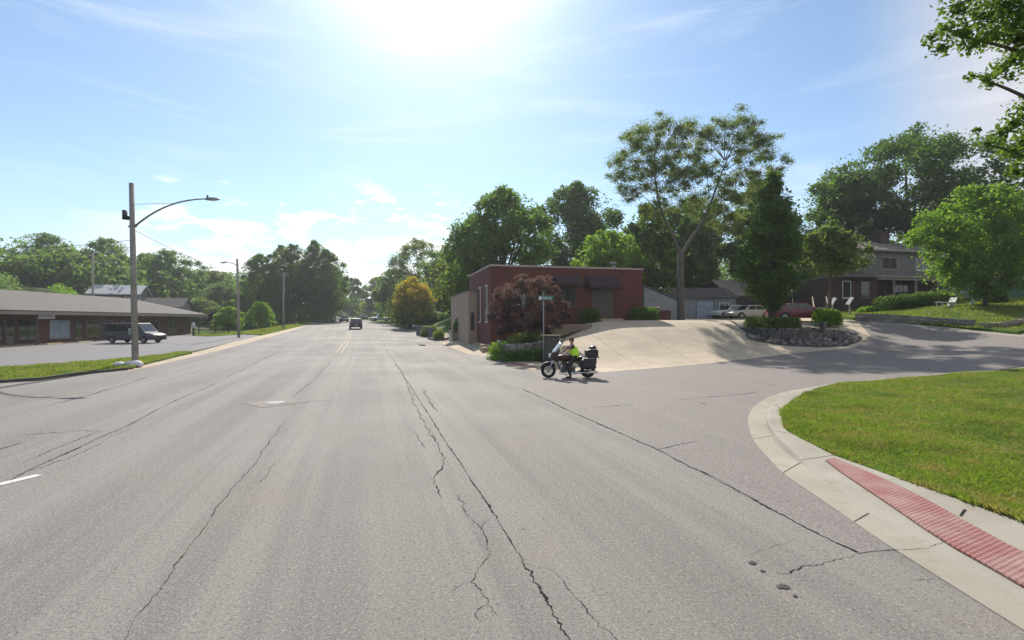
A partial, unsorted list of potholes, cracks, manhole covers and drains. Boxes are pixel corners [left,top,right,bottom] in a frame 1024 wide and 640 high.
crack [519,553,617,640]
crack [452,495,497,622]
crack [523,388,633,438]
manhole cover [246,398,308,408]
crack [3,429,129,471]
crack [402,374,445,496]
